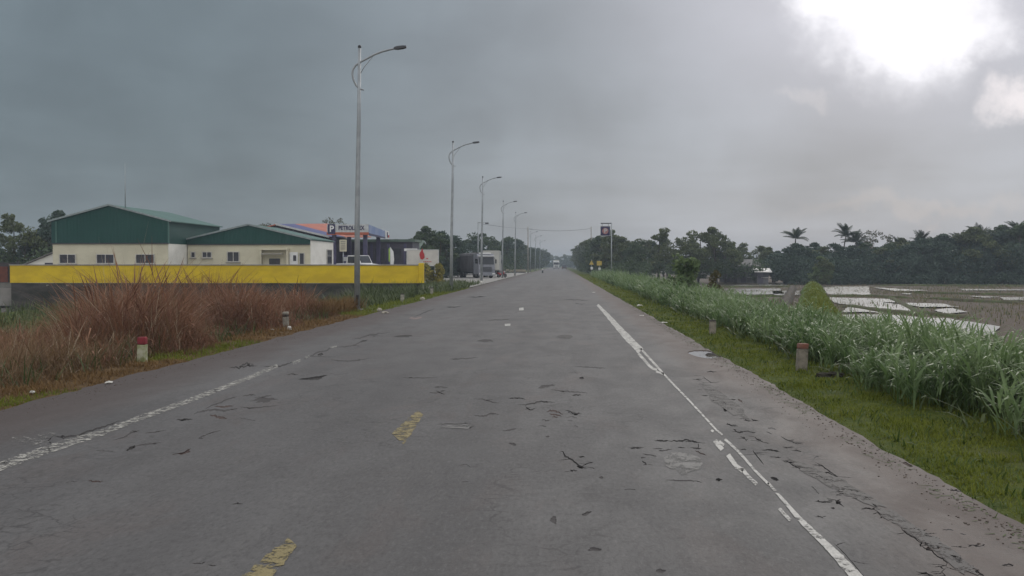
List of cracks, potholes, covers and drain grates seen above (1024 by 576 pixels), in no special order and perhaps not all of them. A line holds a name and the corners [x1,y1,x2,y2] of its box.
crack [561,451,594,472]
crack [693,371,985,576]
crack [631,439,705,465]
crack [46,394,277,452]
crack [231,340,368,387]
crack [442,366,598,431]
